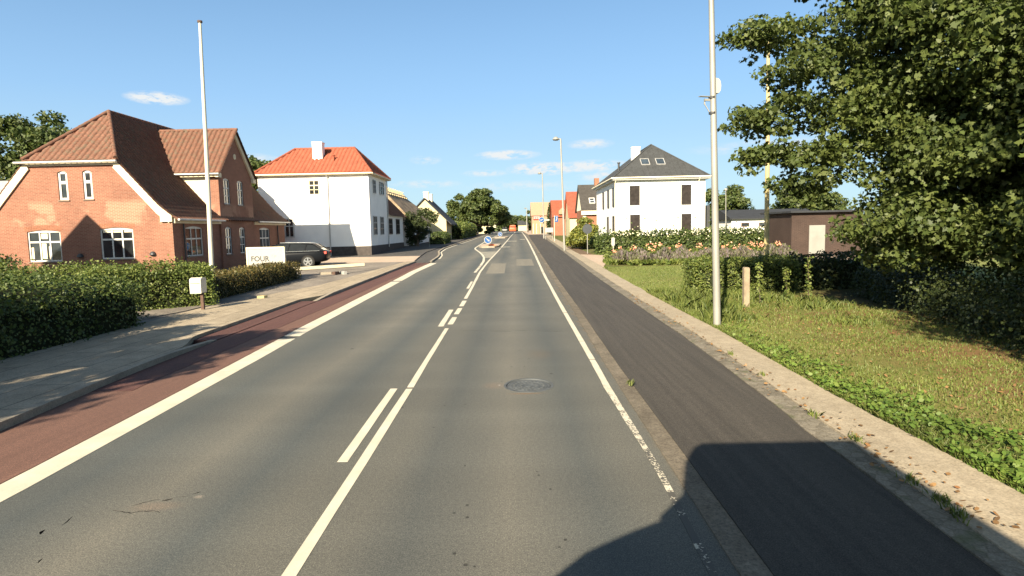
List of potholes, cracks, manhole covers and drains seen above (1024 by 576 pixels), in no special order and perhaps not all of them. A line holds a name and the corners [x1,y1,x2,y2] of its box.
manhole cover [504,378,554,393]
crack [114,492,199,513]
